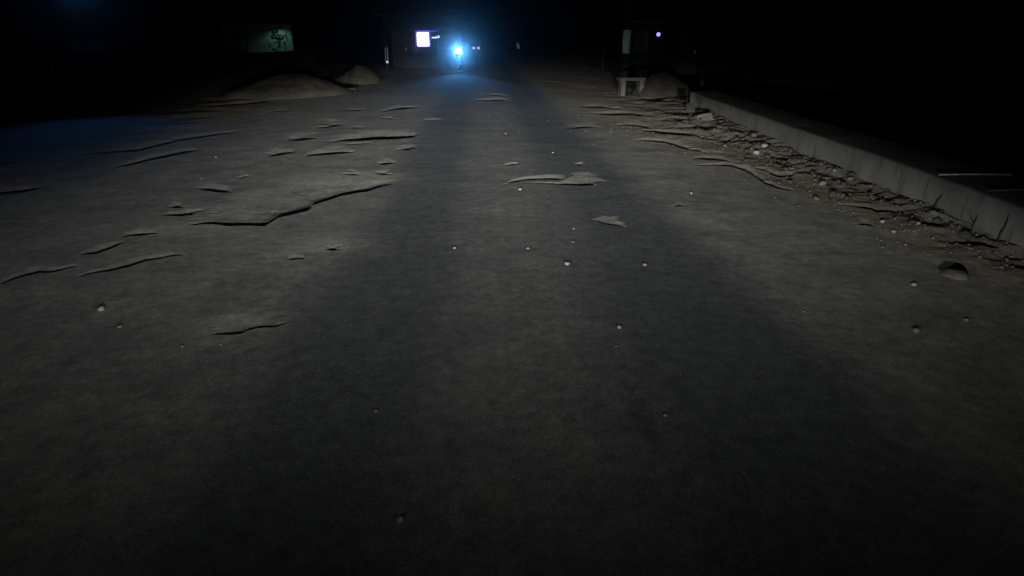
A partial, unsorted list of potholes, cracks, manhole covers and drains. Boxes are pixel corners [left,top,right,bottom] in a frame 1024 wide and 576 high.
crack [541,81,827,207]
crack [837,203,922,227]
